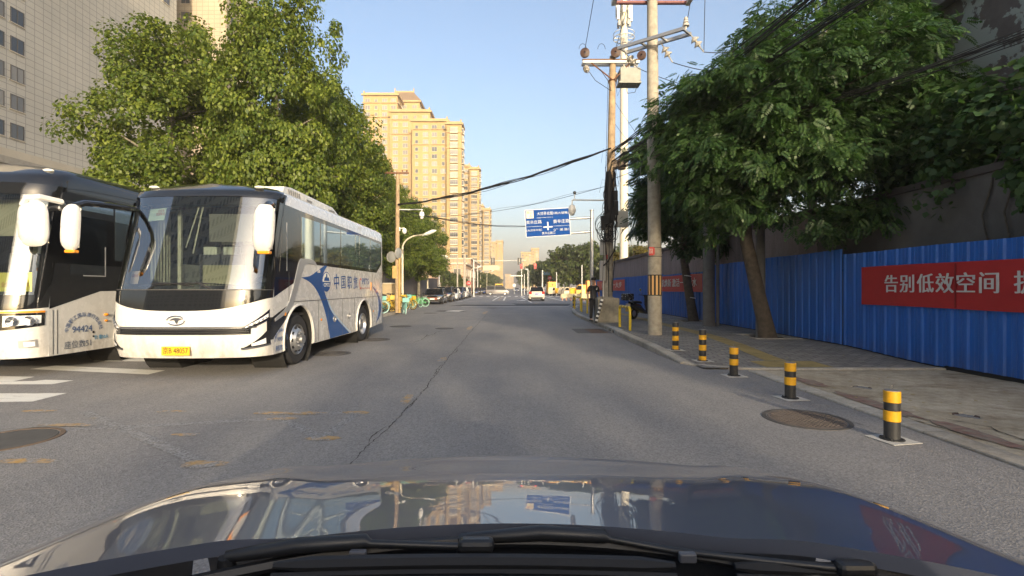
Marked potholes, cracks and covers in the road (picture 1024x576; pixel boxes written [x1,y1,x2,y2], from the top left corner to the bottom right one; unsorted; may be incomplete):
manhole cover [0,427,66,451]
manhole cover [762,409,854,431]
crack [350,317,484,464]
